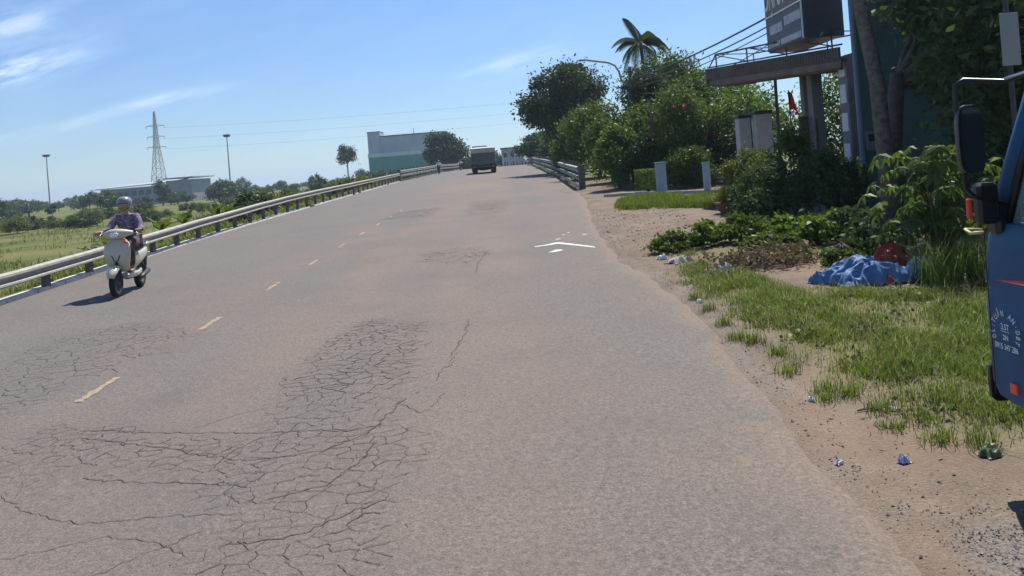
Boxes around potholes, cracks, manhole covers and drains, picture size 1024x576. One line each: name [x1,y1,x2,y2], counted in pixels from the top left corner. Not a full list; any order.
crack [169,319,445,576]
crack [1,322,219,414]
crack [0,422,265,576]
crack [415,247,494,271]
